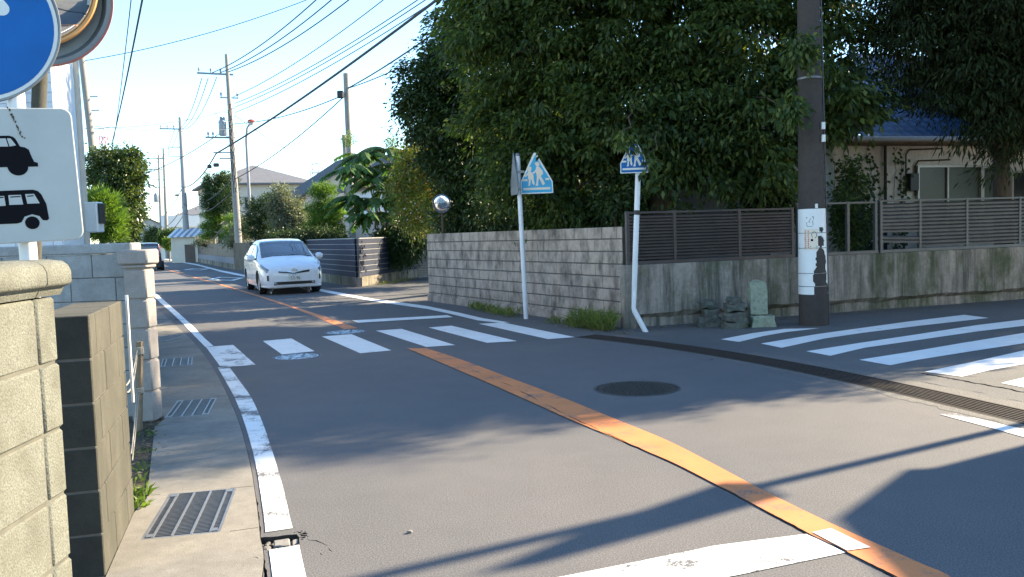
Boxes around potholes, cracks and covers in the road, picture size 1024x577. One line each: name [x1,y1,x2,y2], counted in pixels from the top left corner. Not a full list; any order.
drain grate [160,357,193,367]
drain grate [165,398,217,418]
manhole cover [594,381,681,397]
drain grate [141,488,236,540]
